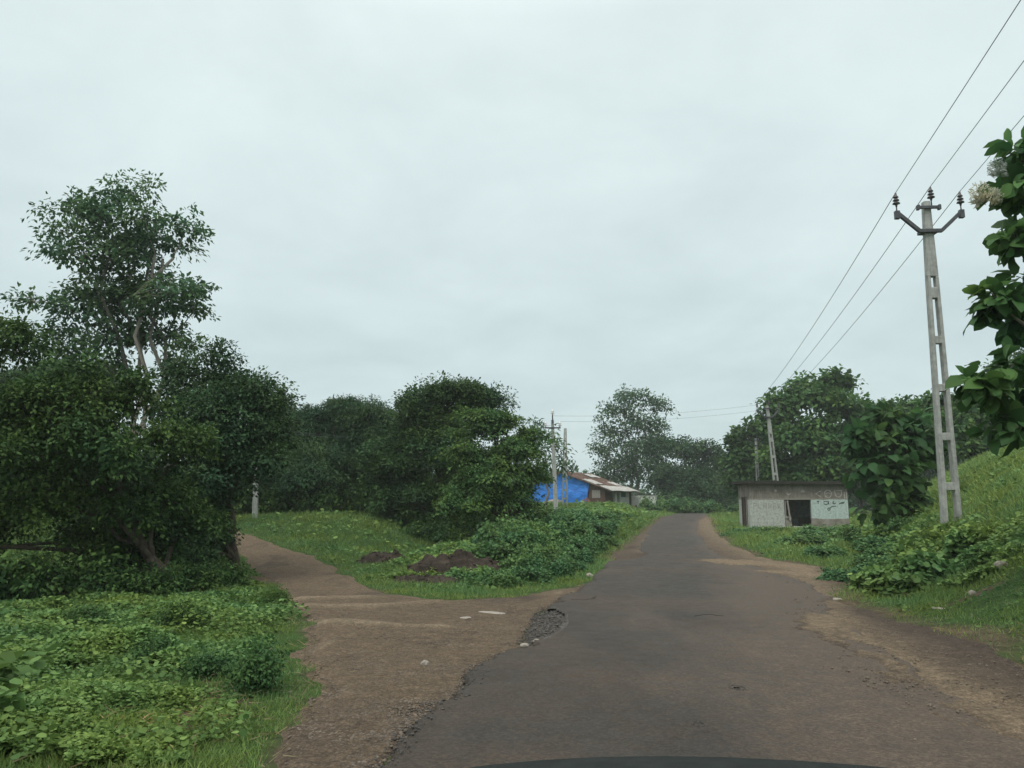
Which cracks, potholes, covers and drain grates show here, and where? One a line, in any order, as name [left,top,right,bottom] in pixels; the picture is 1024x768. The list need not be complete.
pothole [525,607,569,646]
